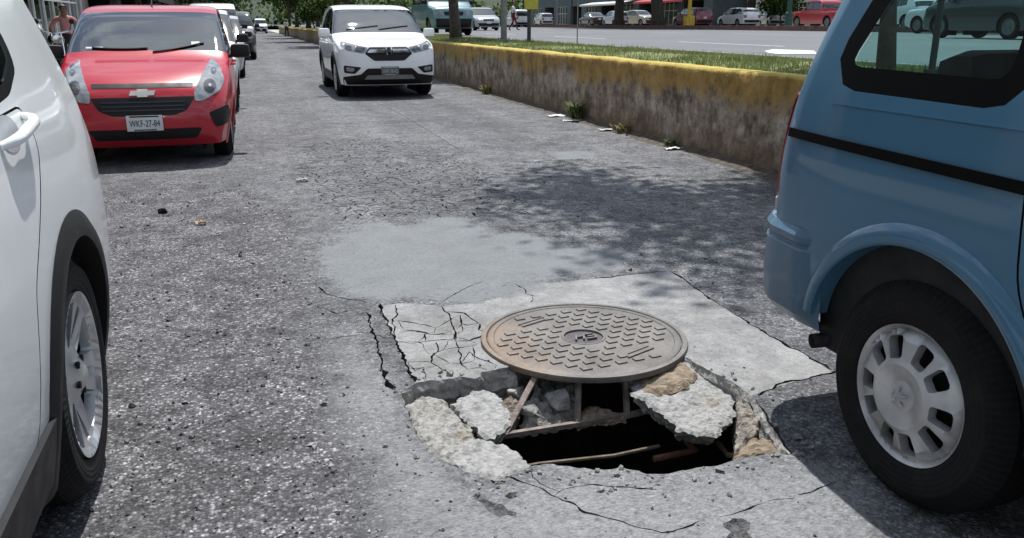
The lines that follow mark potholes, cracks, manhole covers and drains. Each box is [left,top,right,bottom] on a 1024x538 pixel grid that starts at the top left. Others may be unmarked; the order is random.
crack [491,472,699,533]
crack [720,482,836,517]
pothole [399,356,790,481]
crack [315,281,493,390]
manhole cover [487,305,681,375]
